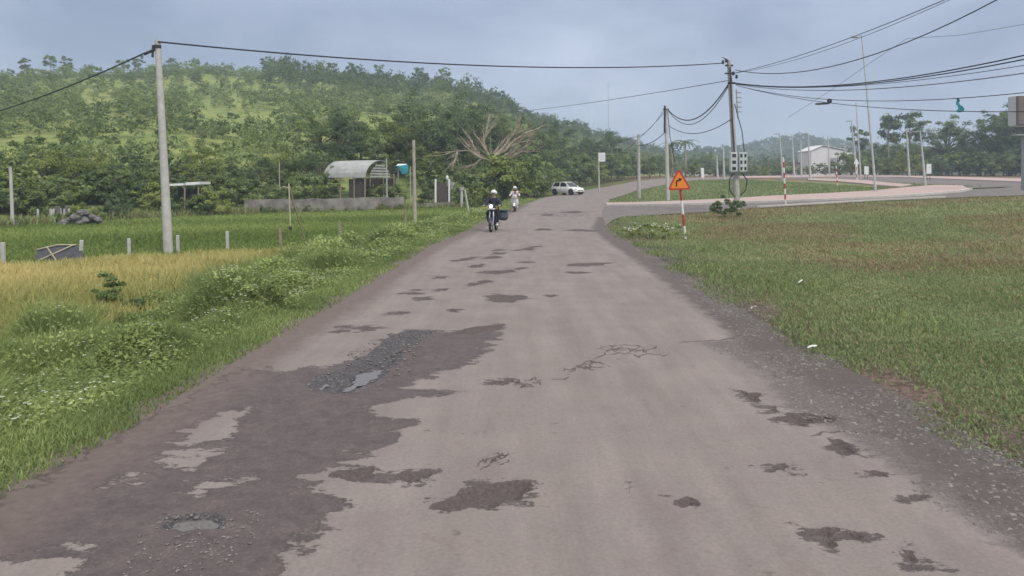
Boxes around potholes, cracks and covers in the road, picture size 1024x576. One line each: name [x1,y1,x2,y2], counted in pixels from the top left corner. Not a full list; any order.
pothole [304,329,437,394]
crack [515,338,736,388]
pothole [159,512,227,532]
crack [475,452,509,470]
